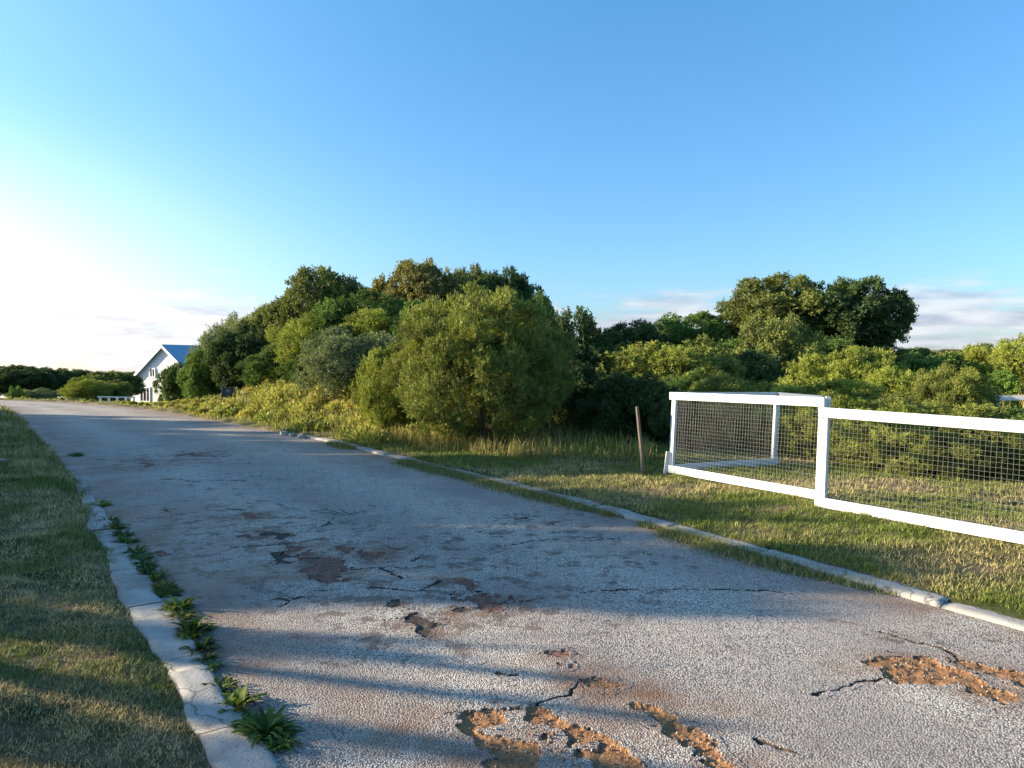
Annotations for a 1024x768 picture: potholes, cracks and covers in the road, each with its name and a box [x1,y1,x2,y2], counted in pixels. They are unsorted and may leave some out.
crack [514,587,794,604]
crack [739,732,813,759]
pothole [401,616,450,641]
pothole [619,699,748,768]
pothole [856,650,1024,711]
crack [800,628,966,701]
crack [458,654,584,707]
crack [462,513,667,557]
pothole [430,699,660,768]
crack [226,503,467,609]
pothole [537,645,587,672]
